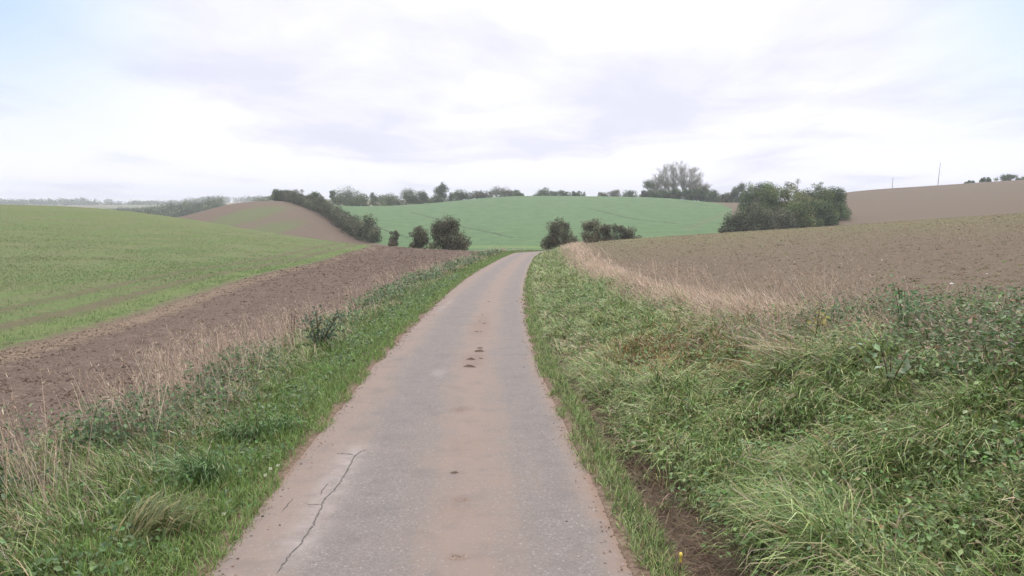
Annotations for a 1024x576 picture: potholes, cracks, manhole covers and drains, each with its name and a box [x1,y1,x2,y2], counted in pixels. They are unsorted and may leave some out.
crack [277,450,365,573]
